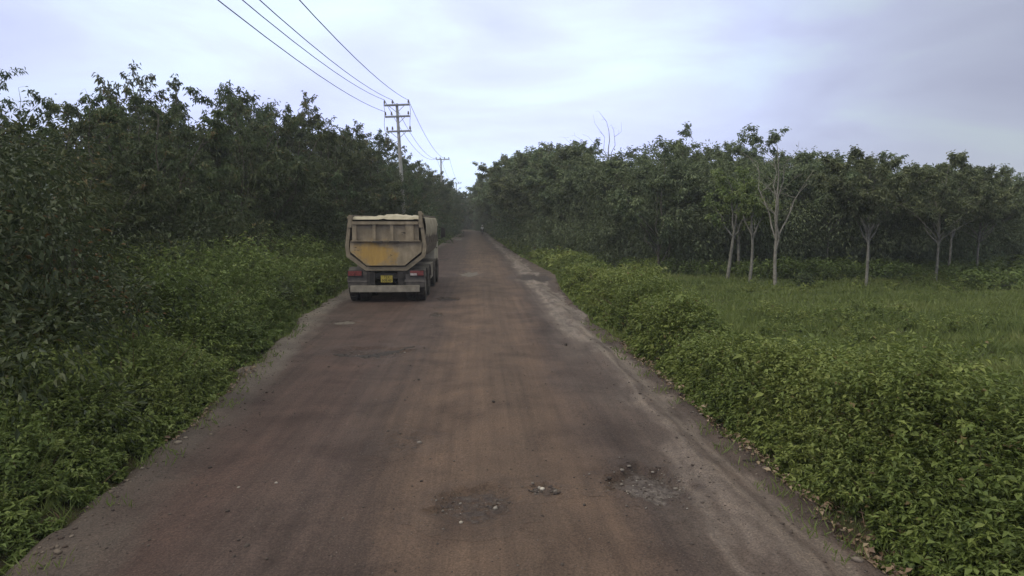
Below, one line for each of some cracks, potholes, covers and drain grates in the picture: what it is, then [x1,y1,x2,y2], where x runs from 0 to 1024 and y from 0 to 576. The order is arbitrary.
pothole [520,477,575,503]
pothole [581,451,731,524]
pothole [394,472,550,542]
